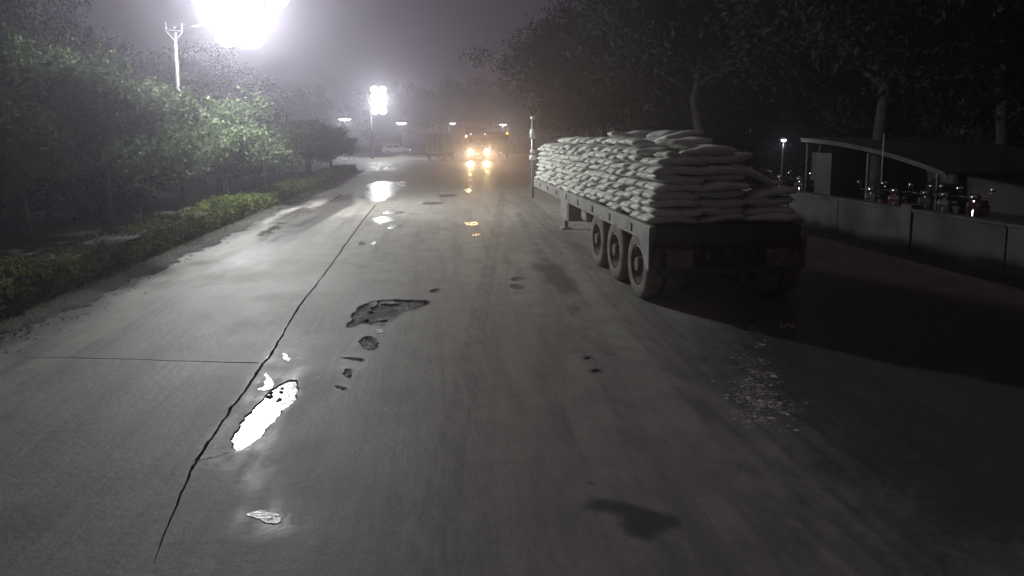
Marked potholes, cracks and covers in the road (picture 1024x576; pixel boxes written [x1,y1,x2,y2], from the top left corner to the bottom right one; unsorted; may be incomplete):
pothole [346,299,431,328]
pothole [230,379,300,450]
pothole [358,336,380,351]
crack [43,205,376,564]
